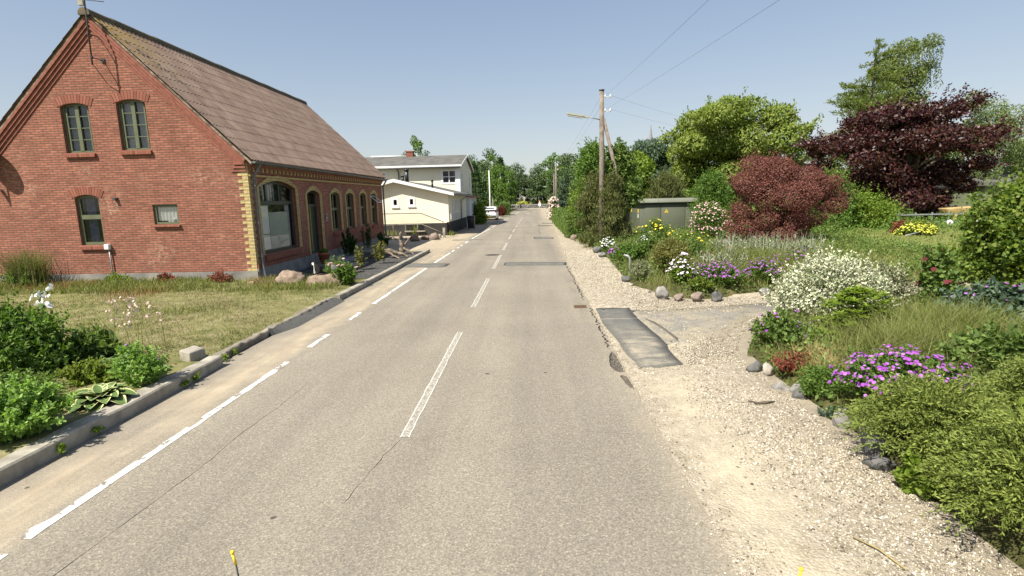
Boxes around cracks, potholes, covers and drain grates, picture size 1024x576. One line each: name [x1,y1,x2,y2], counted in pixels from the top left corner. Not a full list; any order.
crack [567,266,610,349]
pothole [609,351,624,372]
